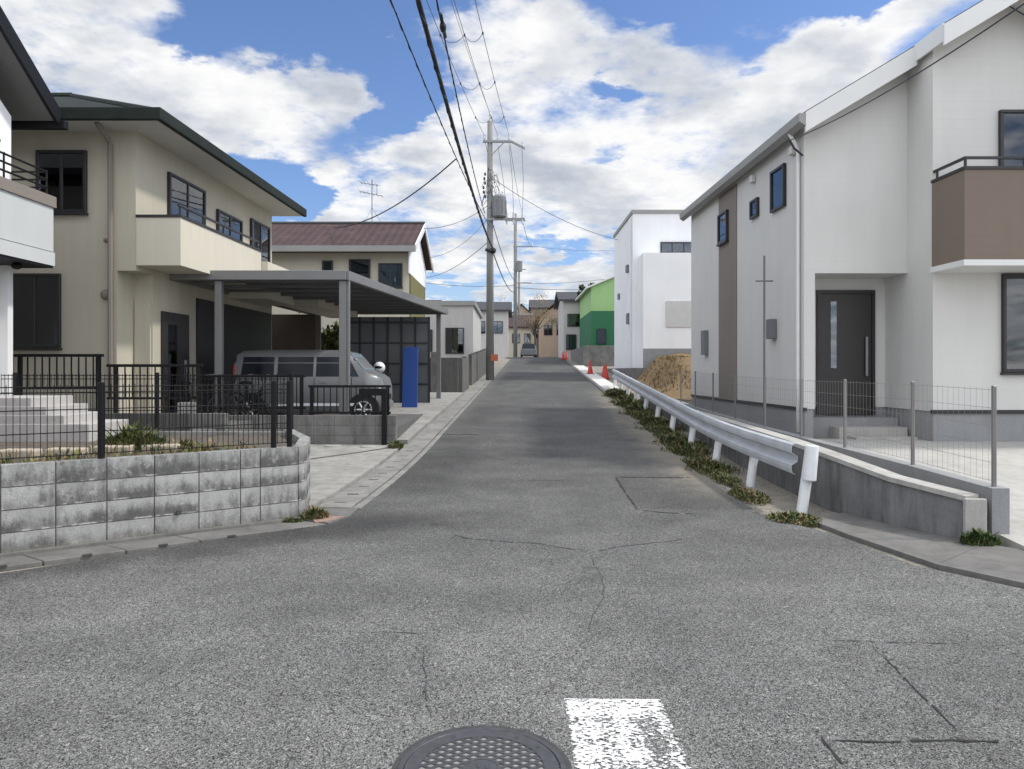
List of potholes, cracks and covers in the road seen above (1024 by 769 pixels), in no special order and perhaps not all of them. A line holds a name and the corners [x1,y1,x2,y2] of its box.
manhole cover [392,725,572,769]
crack [453,534,681,624]
crack [422,654,432,719]
